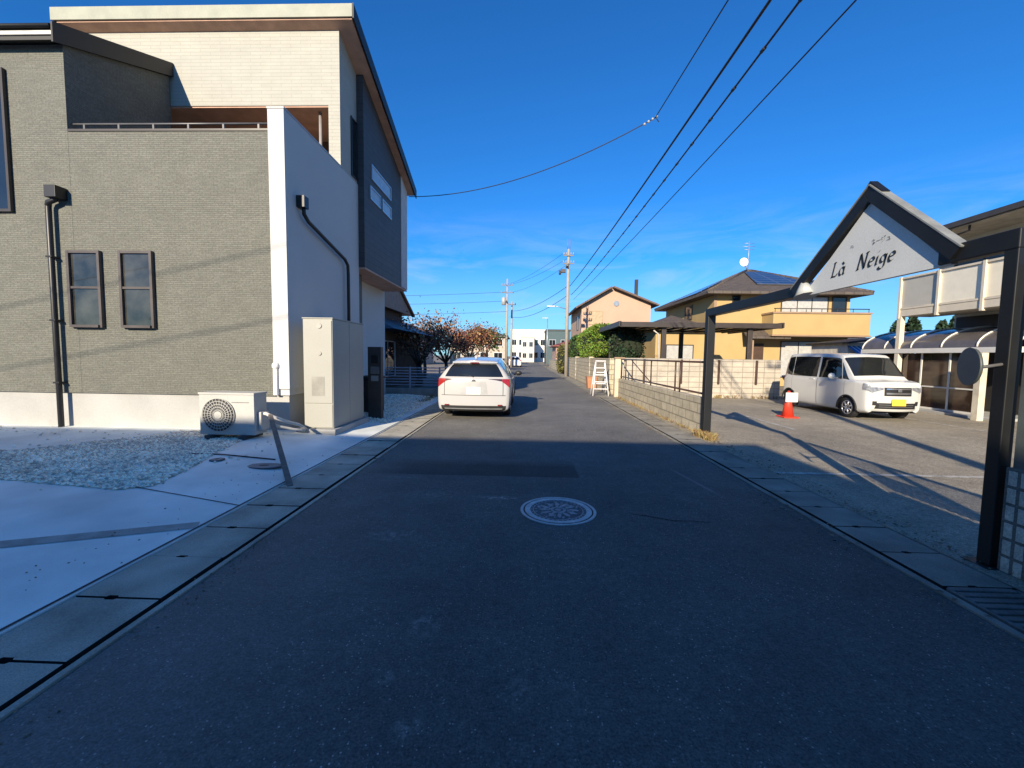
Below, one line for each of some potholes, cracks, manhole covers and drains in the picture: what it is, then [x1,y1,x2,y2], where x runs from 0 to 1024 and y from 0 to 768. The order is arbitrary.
drain grate [946,587,1024,634]
manhole cover [520,497,596,526]
